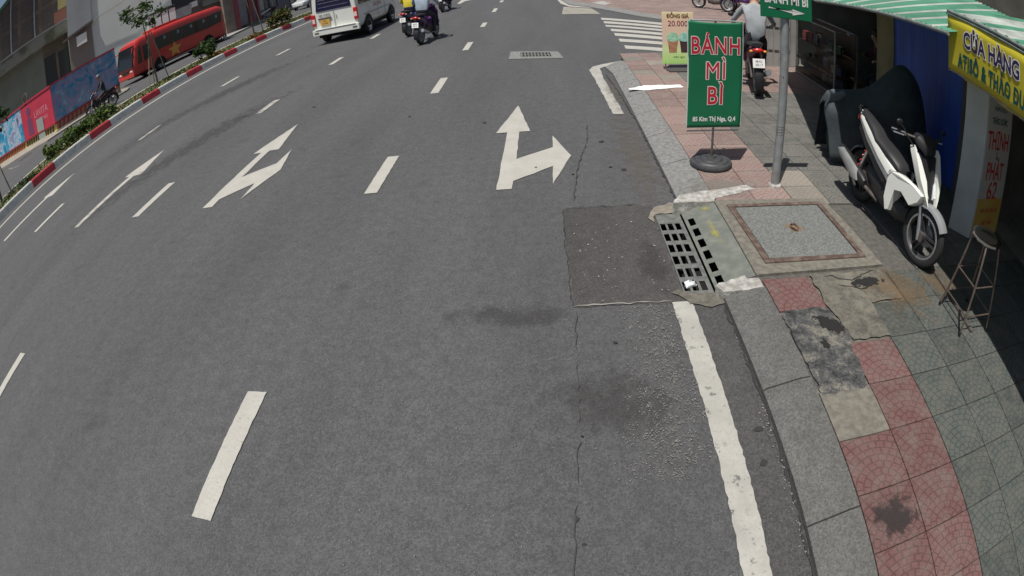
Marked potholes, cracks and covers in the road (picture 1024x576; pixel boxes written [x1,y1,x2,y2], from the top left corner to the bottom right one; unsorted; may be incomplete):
crack [573,125,588,201]
drain grate [655,202,756,294]
manhole cover [714,198,882,278]
crack [828,270,873,289]
